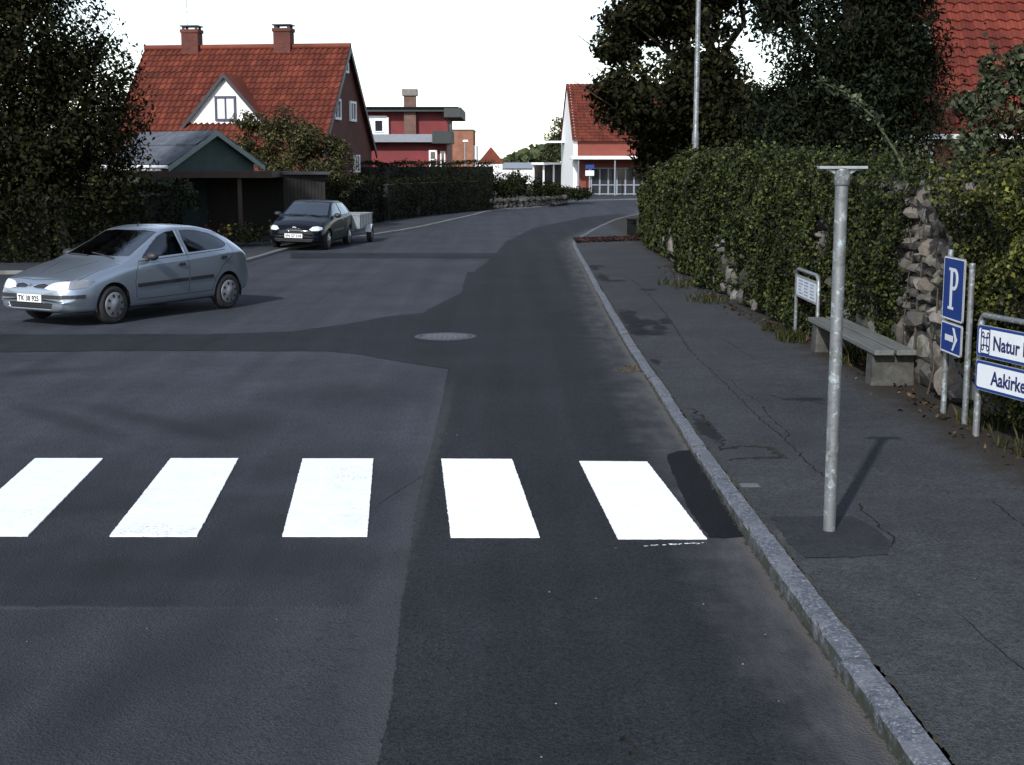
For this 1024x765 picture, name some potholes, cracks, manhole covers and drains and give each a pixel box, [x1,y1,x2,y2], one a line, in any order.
crack [859,503,896,546]
crack [955,610,1024,670]
manhole cover [414,333,477,341]
